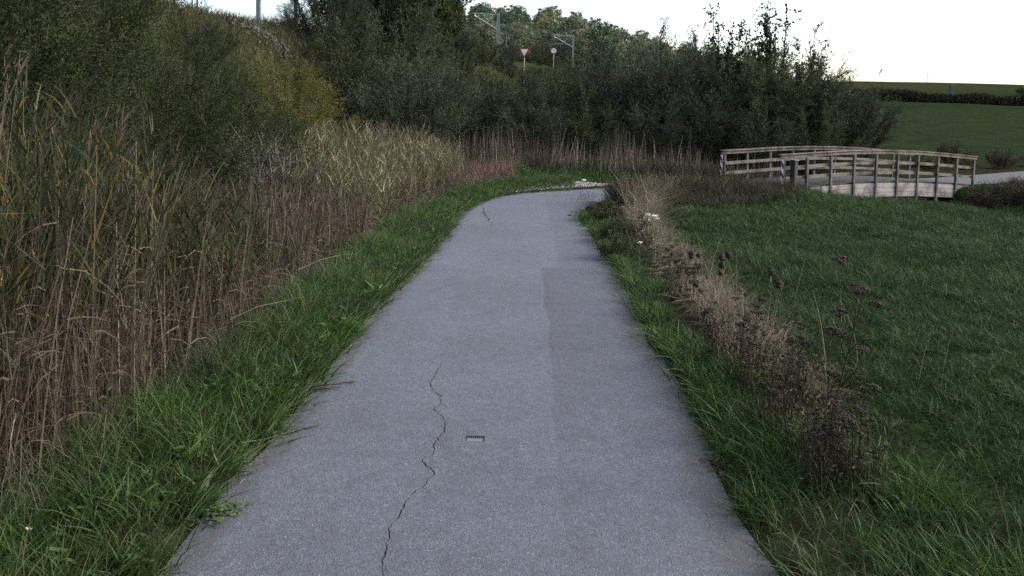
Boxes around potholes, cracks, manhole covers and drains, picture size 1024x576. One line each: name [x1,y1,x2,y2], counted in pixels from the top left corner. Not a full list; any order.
crack [379,355,446,576]
